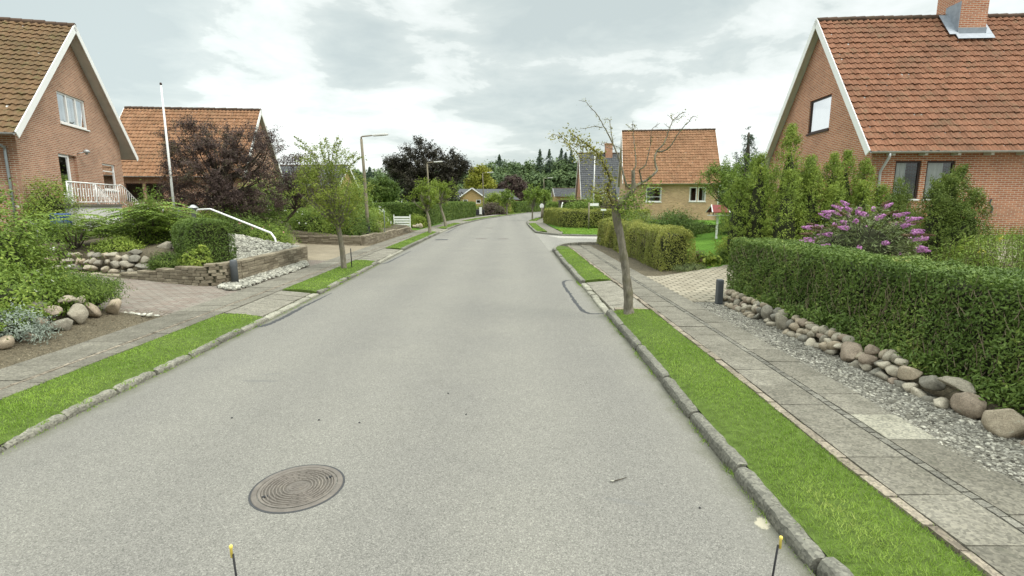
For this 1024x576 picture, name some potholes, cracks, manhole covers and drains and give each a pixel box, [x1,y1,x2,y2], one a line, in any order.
manhole cover [248,464,345,514]
